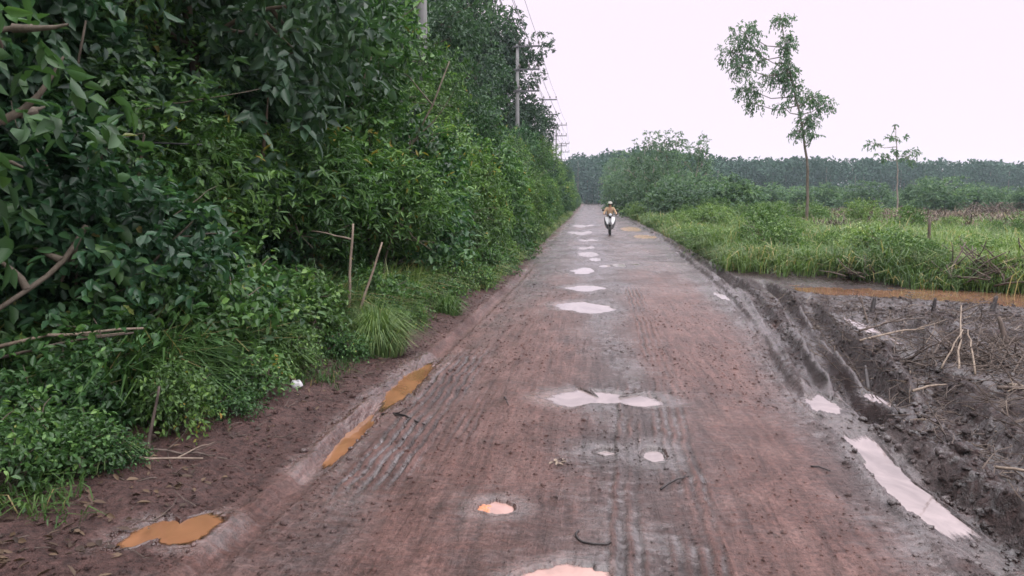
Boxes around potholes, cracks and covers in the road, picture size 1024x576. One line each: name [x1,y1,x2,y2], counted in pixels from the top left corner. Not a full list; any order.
pothole [473,497,519,516]
pothole [591,446,621,456]
pothole [559,284,613,292]
pothole [546,300,626,315]
pothole [103,509,235,551]
pothole [503,556,623,576]
pothole [568,266,597,275]
pothole [638,445,671,463]
pothole [530,386,679,409]
